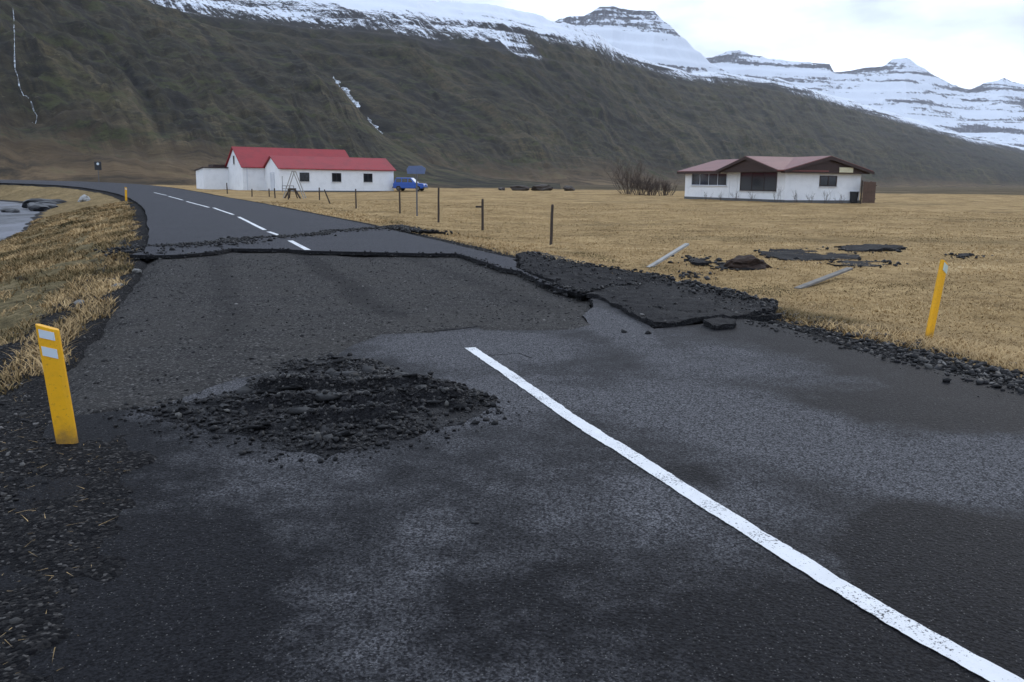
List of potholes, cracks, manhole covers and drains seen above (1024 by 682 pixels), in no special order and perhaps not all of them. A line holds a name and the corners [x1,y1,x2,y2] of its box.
crack [74,224,459,257]
crack [542,280,677,301]
